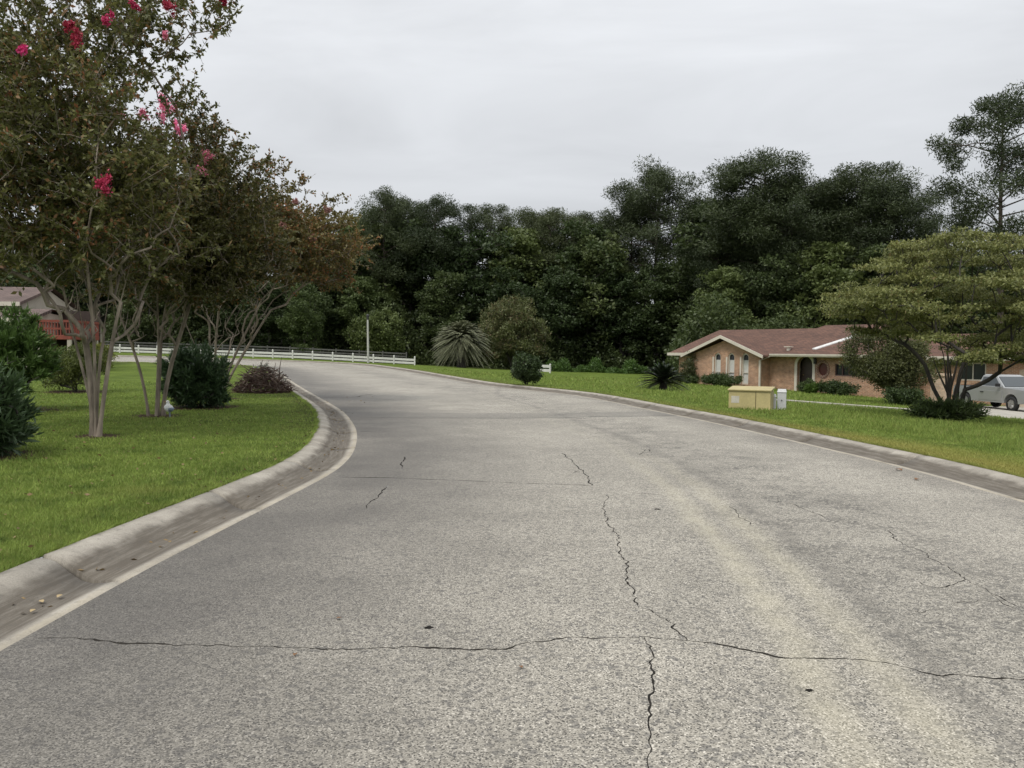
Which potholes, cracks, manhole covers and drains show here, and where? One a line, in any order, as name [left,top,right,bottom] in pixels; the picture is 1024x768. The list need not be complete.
crack [69,495,1024,768]
